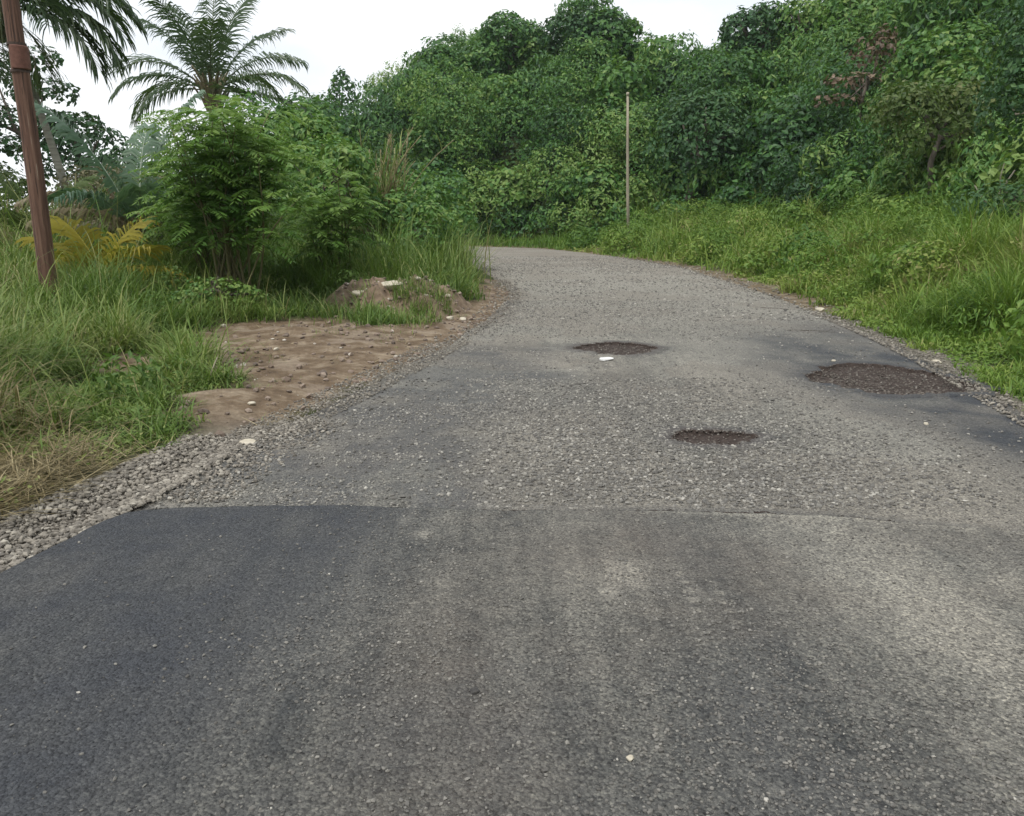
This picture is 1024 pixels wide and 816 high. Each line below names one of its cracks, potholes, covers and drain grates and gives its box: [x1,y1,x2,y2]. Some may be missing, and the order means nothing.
pothole [561,340,669,358]
pothole [653,424,777,453]
pothole [789,360,1004,400]
